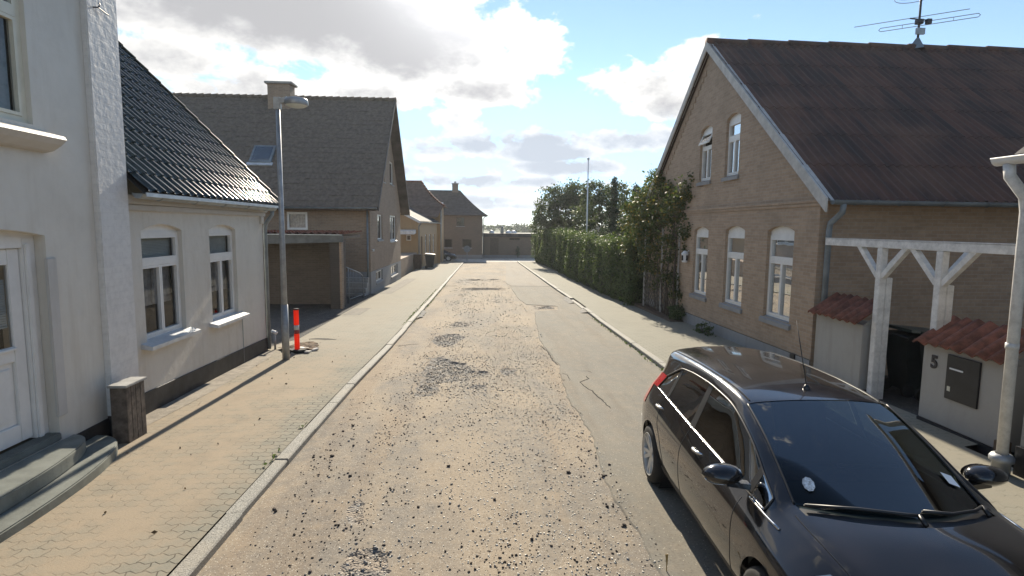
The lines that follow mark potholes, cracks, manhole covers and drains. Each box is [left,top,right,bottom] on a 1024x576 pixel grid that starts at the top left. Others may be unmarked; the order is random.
pothole [432,334,466,347]
crack [542,347,610,408]
pothole [345,498,365,525]
pothole [340,548,392,576]
pothole [414,356,490,397]
